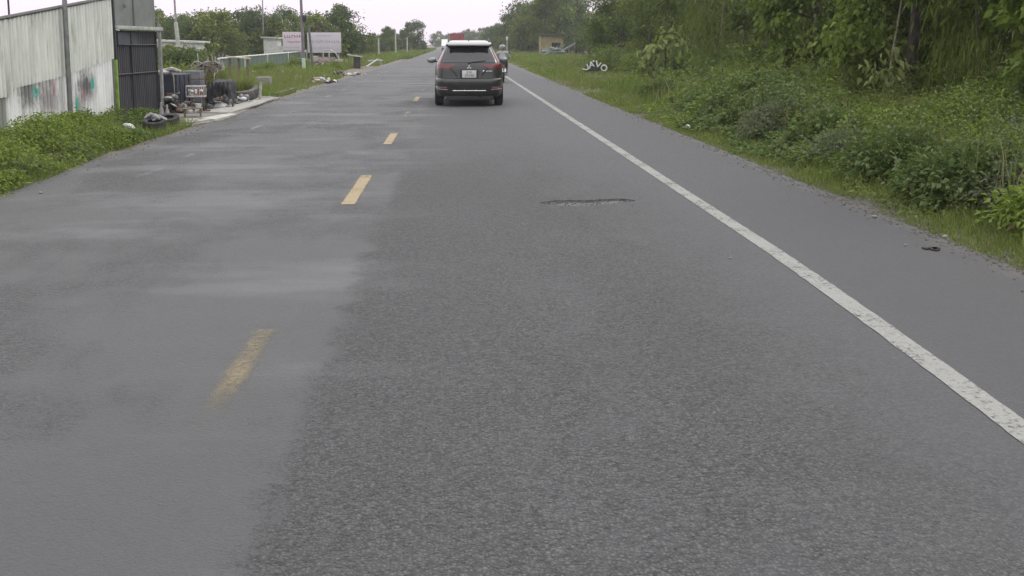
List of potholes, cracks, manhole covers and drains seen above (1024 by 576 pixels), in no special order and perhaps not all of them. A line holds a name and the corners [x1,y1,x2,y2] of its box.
pothole [539,199,650,210]
